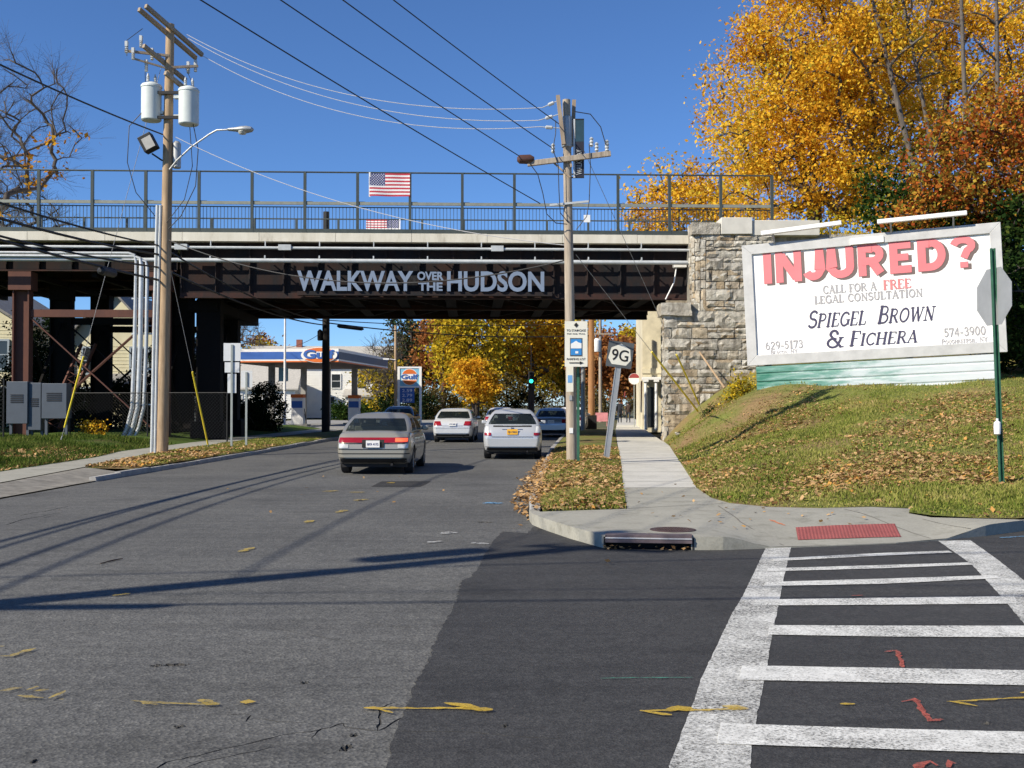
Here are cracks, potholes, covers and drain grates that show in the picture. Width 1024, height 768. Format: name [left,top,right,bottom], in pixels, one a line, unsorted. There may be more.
drain grate [604,533,694,550]
crack [157,701,557,768]
